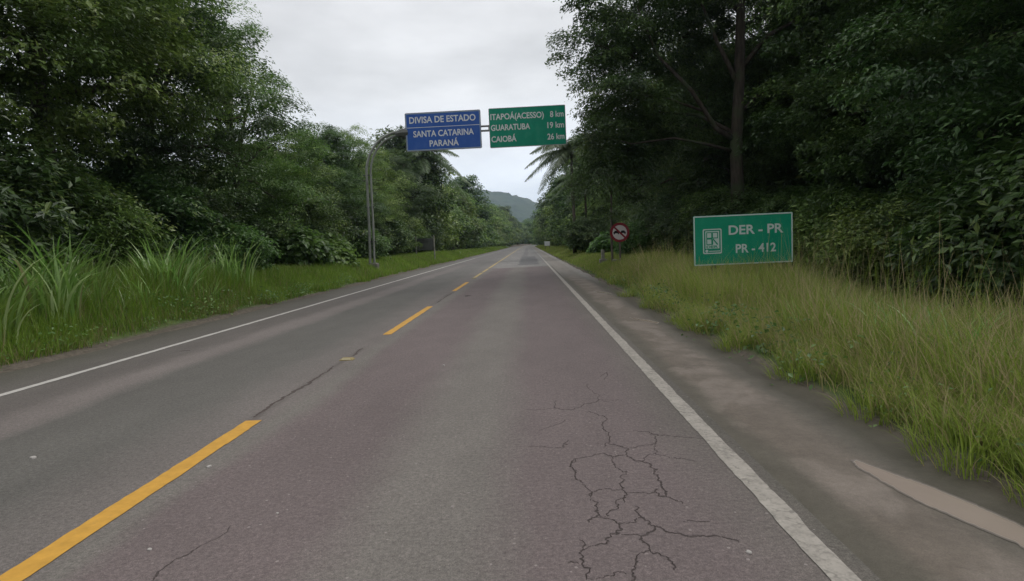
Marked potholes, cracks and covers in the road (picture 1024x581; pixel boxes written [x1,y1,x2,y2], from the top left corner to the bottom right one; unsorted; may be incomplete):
crack [152,525,231,581]
